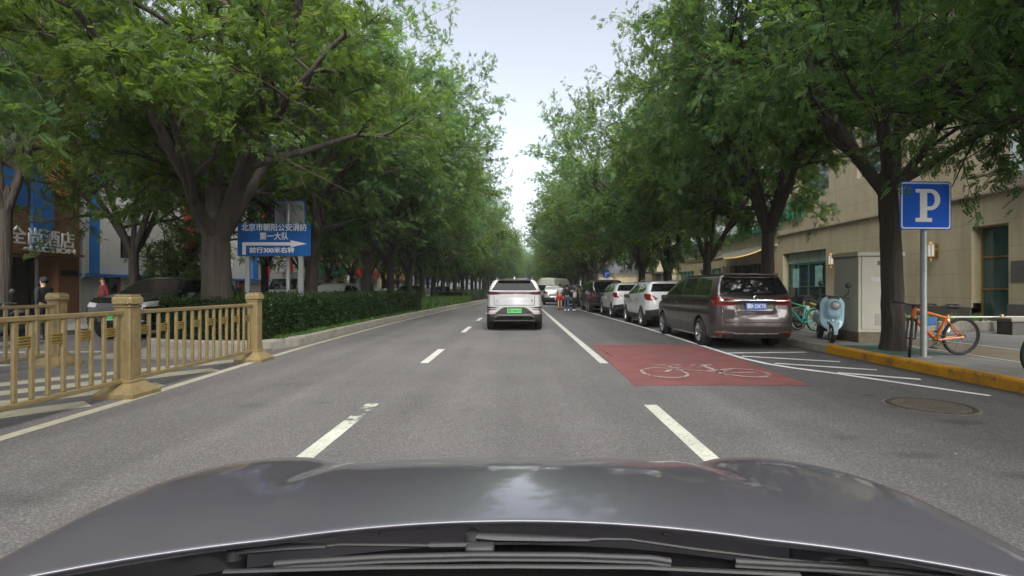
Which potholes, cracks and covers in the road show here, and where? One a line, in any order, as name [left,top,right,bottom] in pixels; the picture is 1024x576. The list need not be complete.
manhole cover [881,397,983,416]
